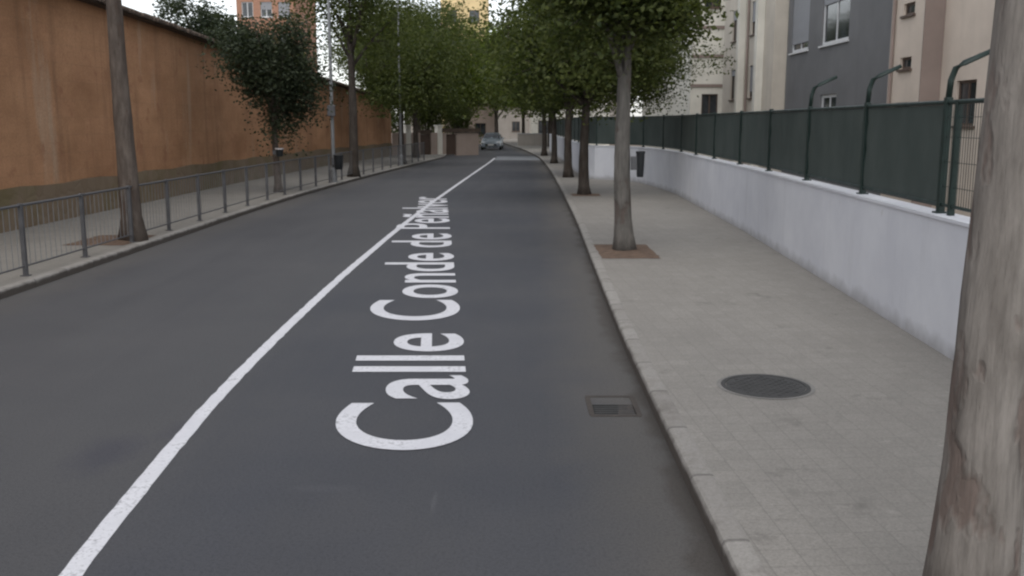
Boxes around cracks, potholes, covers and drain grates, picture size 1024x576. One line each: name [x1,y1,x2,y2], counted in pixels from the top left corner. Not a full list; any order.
manhole cover [717,373,816,399]
drain grate [585,395,642,417]
